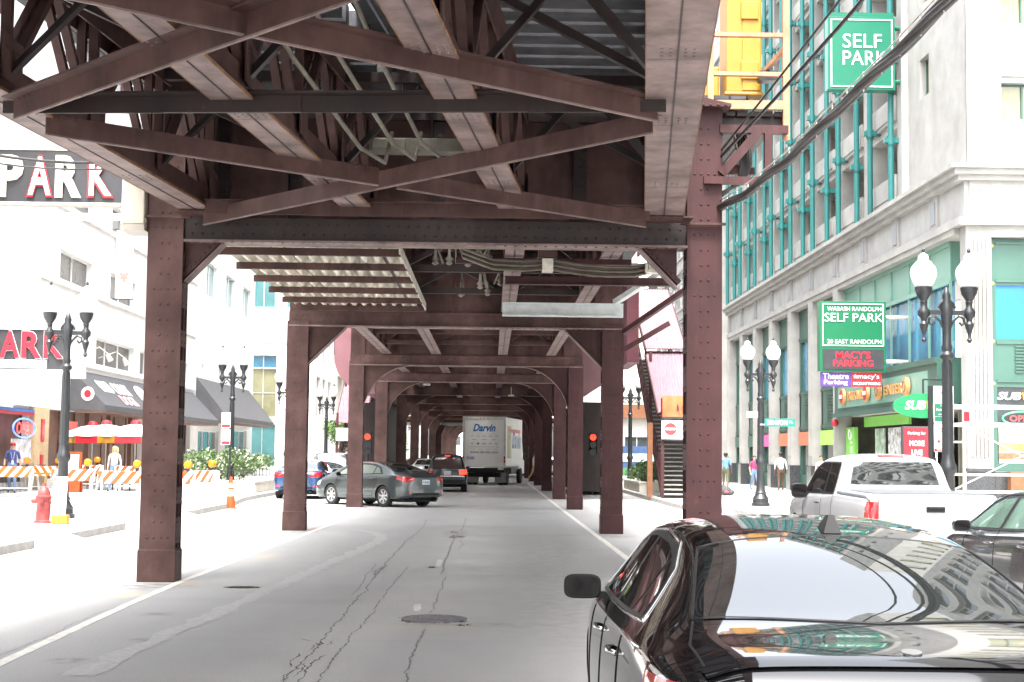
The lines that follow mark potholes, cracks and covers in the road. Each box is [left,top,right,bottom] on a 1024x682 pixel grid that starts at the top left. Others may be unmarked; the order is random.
manhole cover [401,614,467,624]
crack [281,520,426,682]
